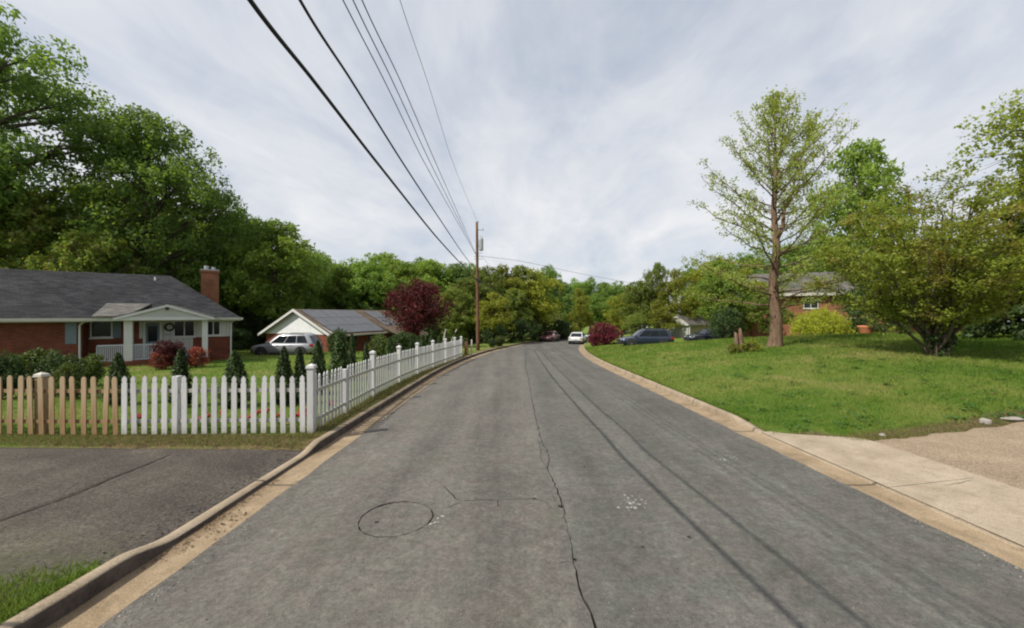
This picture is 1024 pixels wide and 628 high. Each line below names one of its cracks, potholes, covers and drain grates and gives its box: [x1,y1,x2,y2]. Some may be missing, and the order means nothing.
crack [444,365,597,628]
manhole cover [358,502,434,538]
